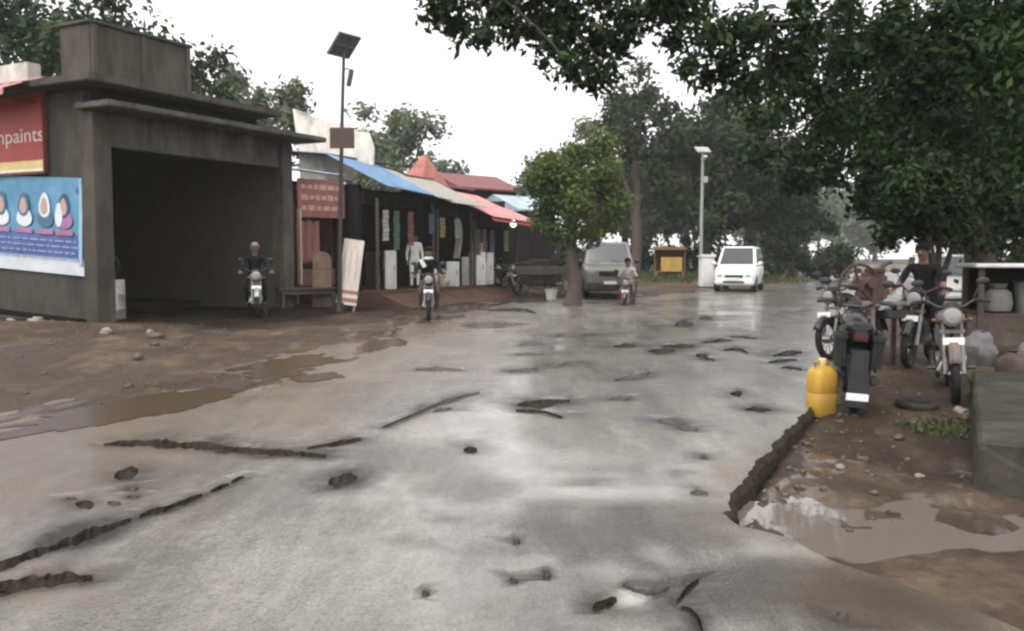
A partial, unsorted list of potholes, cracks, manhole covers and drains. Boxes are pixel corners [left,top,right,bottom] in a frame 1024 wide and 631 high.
crack [623,578,703,631]
pothole [648,336,757,361]
crack [0,476,243,572]
pothole [516,399,570,418]
pothole [614,372,650,381]
pothole [659,418,697,431]
pothole [76,500,94,510]
pothole [593,597,617,612]
crack [104,437,361,458]
crack [383,392,479,428]
pothole [114,466,138,481]
pothole [329,472,357,488]
